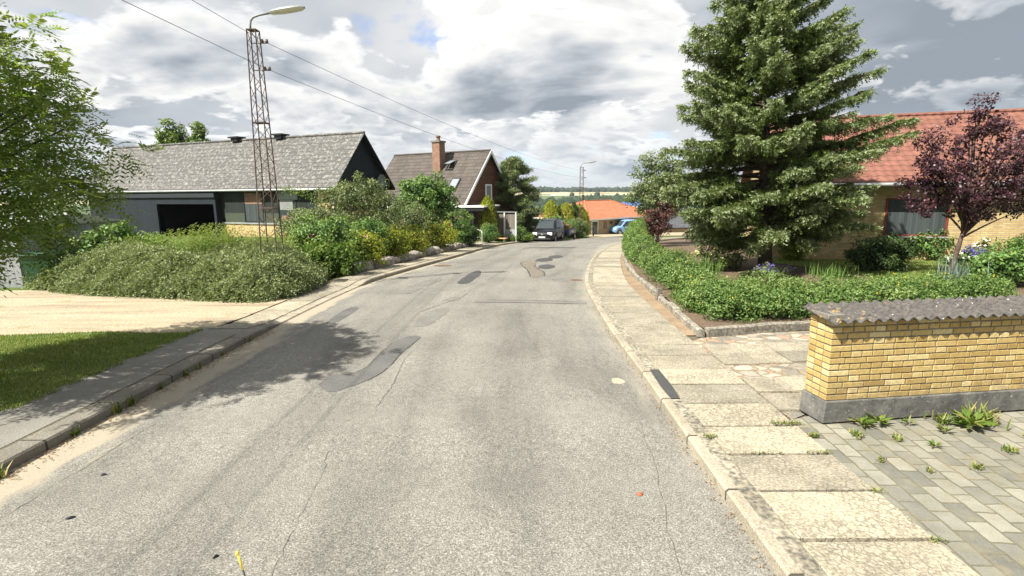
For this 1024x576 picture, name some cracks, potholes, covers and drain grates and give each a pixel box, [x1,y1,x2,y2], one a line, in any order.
crack [322,339,418,408]
crack [271,440,333,576]
crack [641,425,682,575]
